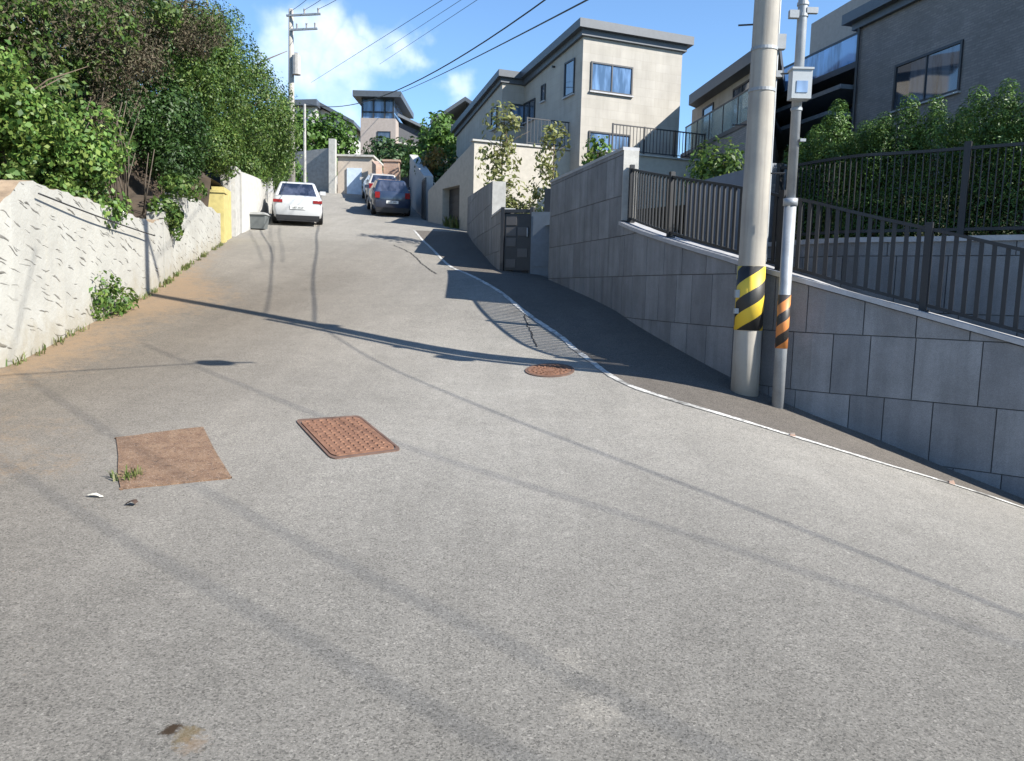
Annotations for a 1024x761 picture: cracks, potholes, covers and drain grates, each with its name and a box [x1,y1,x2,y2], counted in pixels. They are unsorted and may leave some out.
manhole cover [525,363,574,377]
manhole cover [297,415,400,459]
